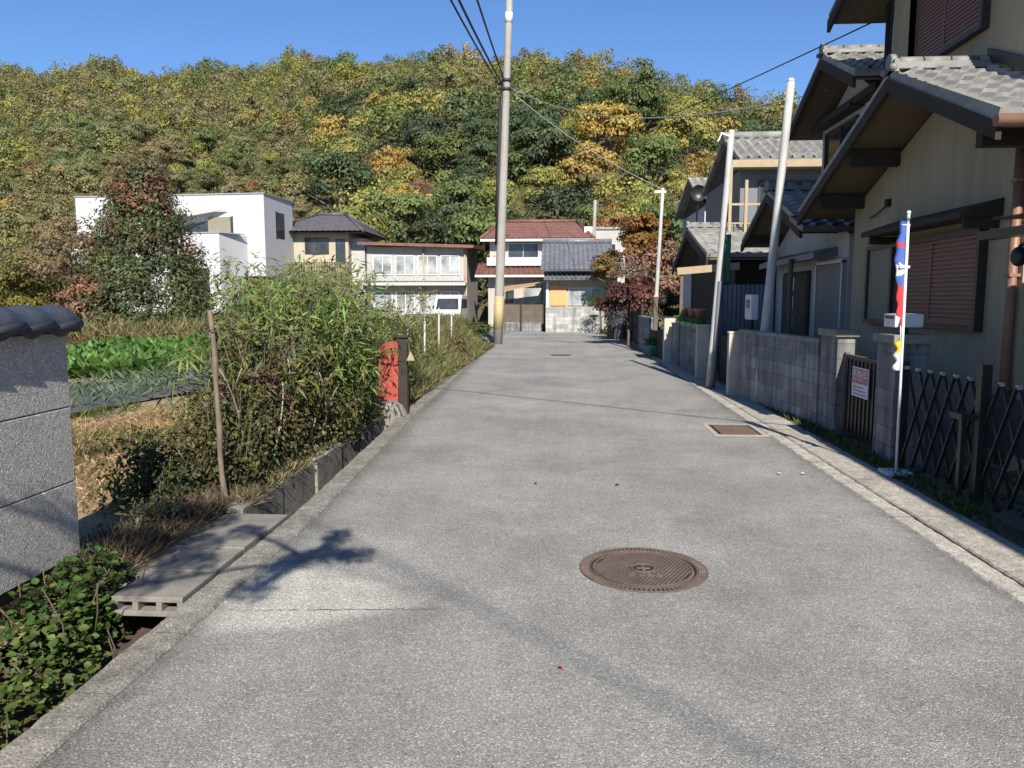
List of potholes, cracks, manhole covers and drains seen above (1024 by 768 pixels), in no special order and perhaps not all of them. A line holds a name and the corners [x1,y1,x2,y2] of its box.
manhole cover [580,547,709,593]
manhole cover [701,423,769,436]
